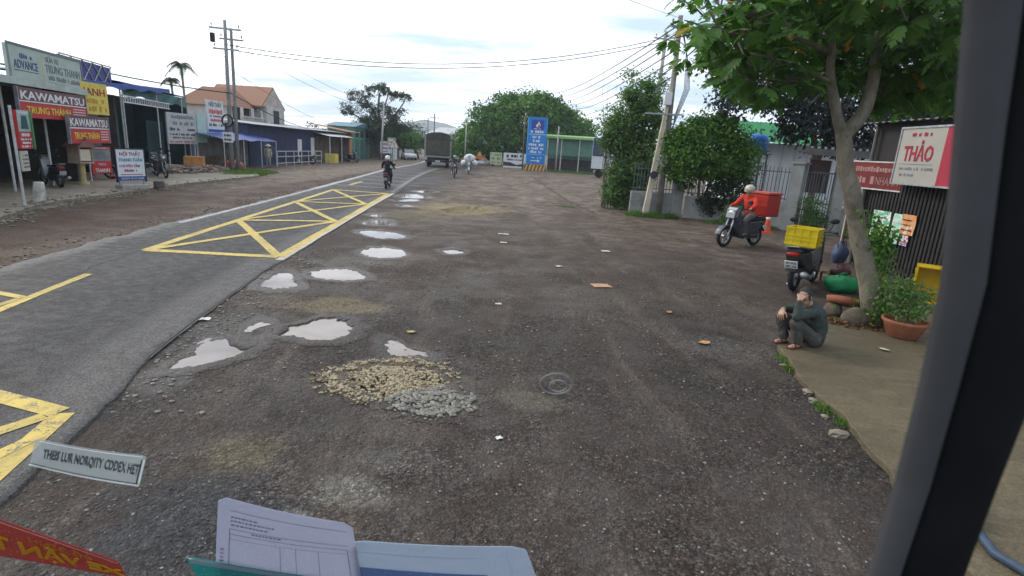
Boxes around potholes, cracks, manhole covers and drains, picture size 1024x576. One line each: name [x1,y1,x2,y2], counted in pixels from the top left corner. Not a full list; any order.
pothole [365,331,452,366]
pothole [348,245,413,260]
pothole [139,332,276,379]
pothole [354,218,405,227]
pothole [431,247,475,256]
pothole [348,228,418,240]
pothole [293,266,380,284]
pothole [227,314,289,350]
pothole [244,267,312,294]
pothole [252,312,375,347]
